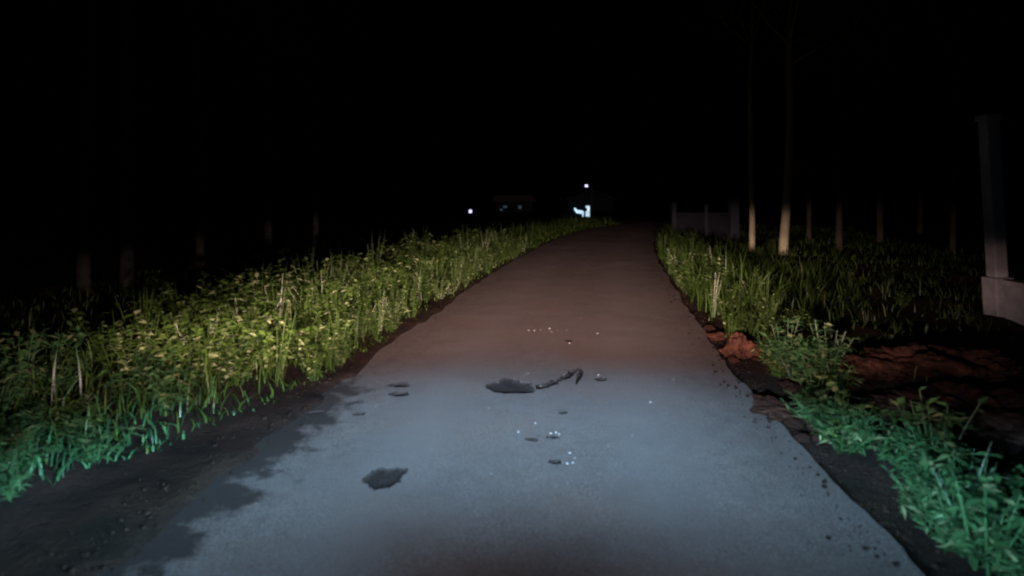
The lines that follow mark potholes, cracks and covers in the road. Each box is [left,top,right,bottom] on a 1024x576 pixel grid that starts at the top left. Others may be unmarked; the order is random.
pothole [362,467,408,491]
pothole [485,377,536,394]
